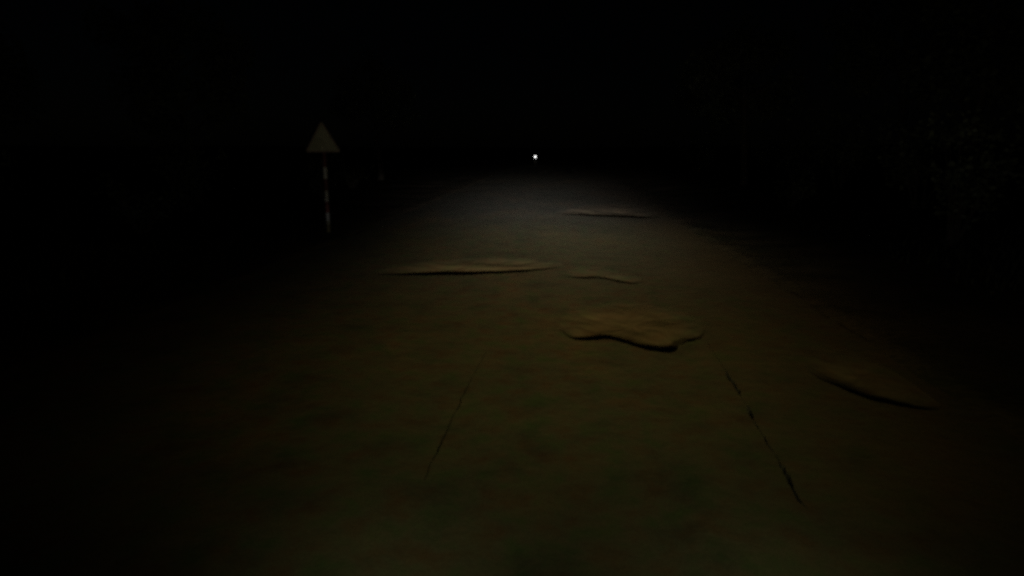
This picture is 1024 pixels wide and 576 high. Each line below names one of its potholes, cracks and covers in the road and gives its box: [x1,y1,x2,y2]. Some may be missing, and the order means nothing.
pothole [559,302,706,353]
pothole [553,203,659,218]
pothole [376,258,563,276]
crack [706,341,808,509]
pothole [802,346,941,410]
pothole [565,266,643,284]
crack [424,352,486,480]
